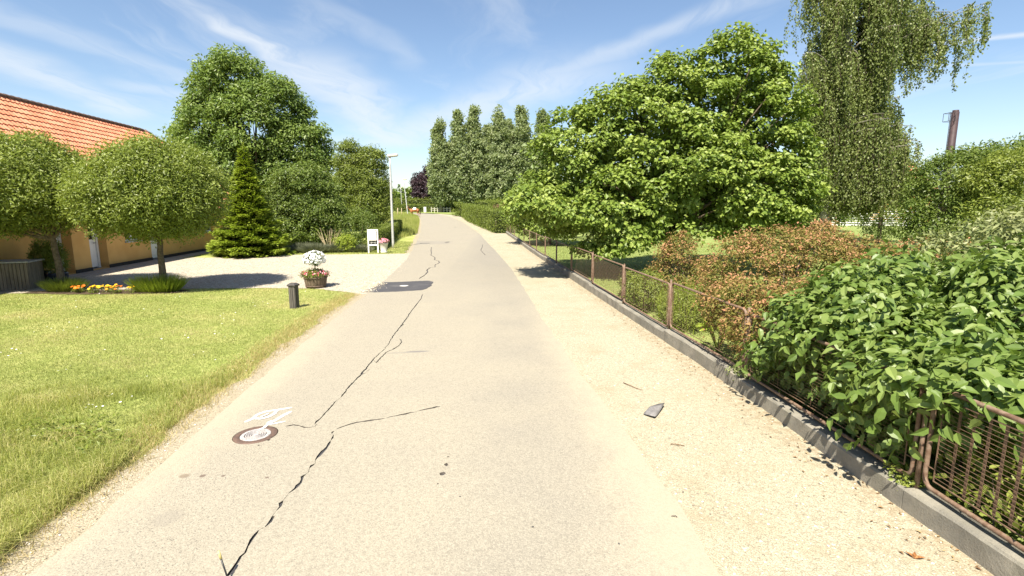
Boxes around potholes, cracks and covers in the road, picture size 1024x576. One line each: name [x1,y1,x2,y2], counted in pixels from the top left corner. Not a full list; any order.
manhole cover [233,425,278,444]
crack [227,247,440,576]
